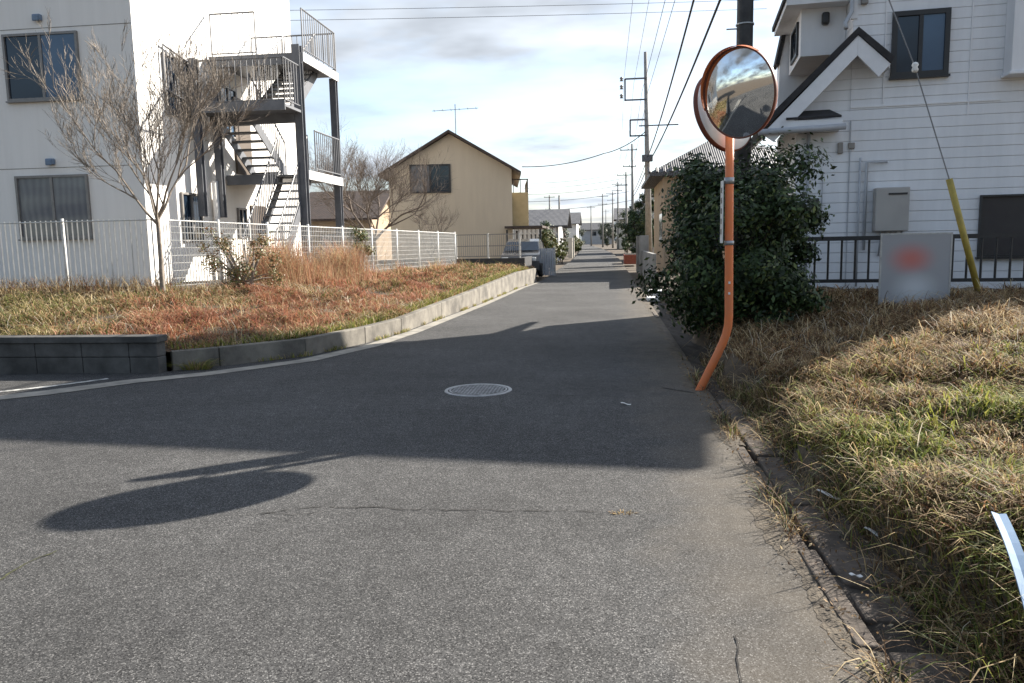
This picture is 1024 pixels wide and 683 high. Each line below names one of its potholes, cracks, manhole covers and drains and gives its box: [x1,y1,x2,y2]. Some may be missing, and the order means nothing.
crack [0,550,57,580]
crack [239,506,602,516]
manhole cover [444,384,512,397]
crack [734,634,742,683]
